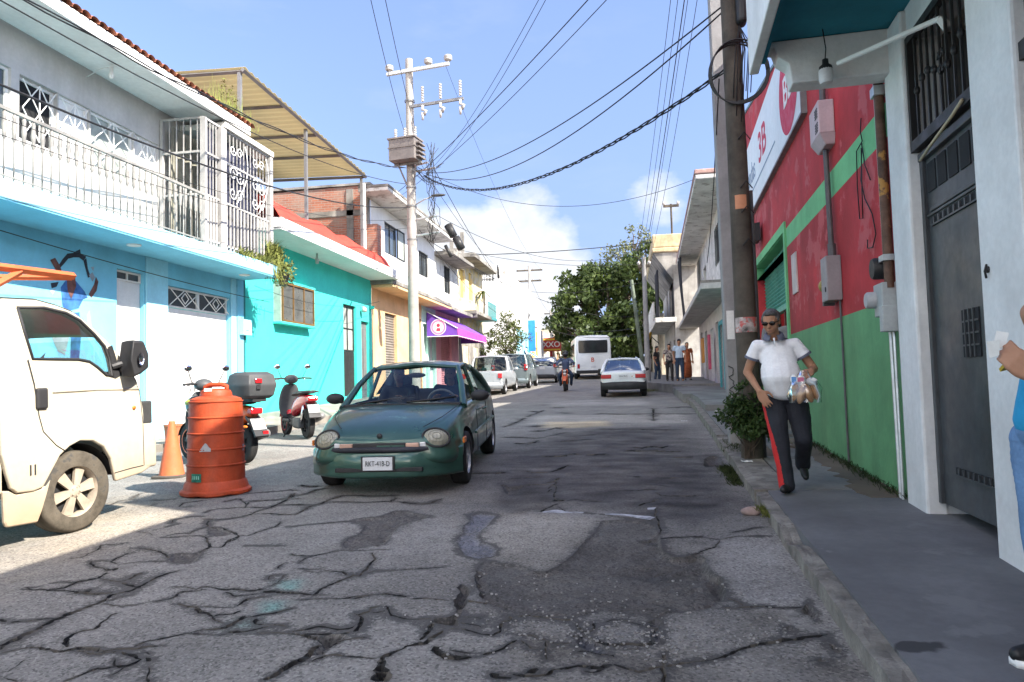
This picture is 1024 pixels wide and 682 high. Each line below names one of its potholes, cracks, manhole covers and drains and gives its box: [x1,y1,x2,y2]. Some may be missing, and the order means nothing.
pothole [648,618,663,643]
pothole [474,520,728,618]
pothole [576,635,610,654]
crack [0,485,828,682]
crack [473,407,759,555]
